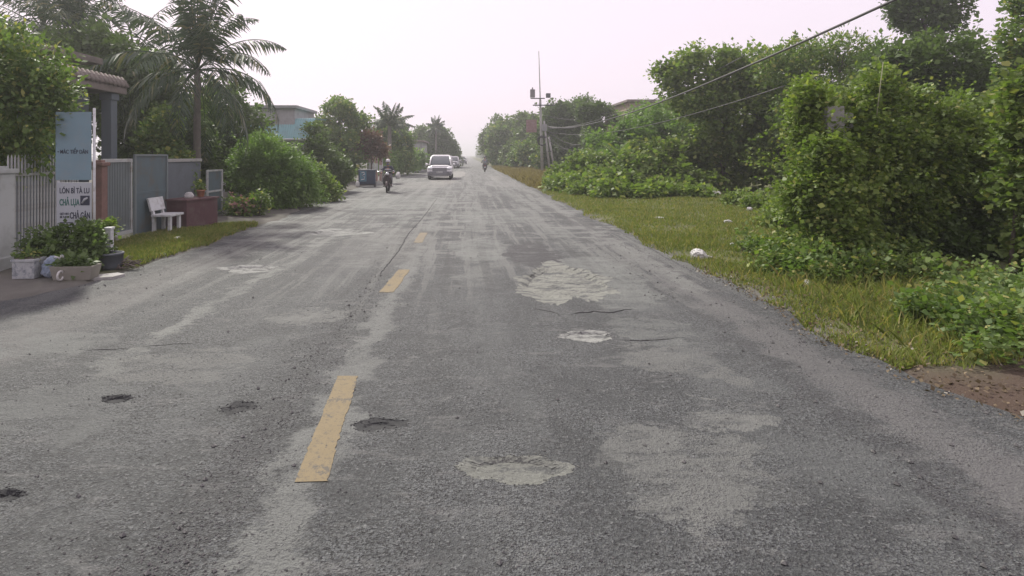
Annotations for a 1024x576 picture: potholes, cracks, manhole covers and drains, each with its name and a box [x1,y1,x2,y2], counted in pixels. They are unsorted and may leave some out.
crack [380,200,436,275]
pothole [350,417,411,432]
pothole [217,400,260,416]
pothole [101,394,134,405]
pothole [0,486,28,502]
